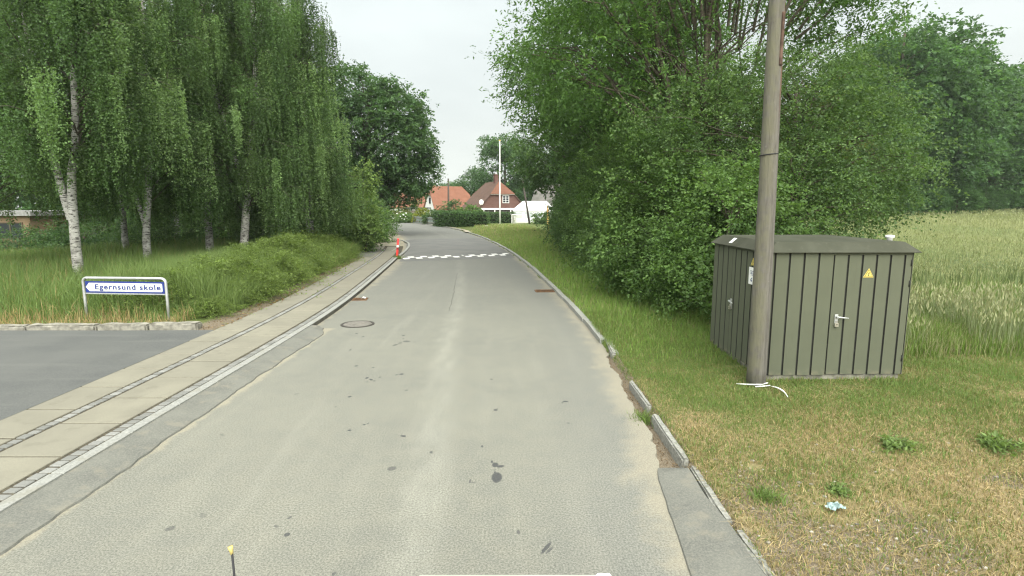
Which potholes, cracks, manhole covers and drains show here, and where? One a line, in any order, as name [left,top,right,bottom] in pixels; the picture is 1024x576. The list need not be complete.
manhole cover [340,320,375,328]
